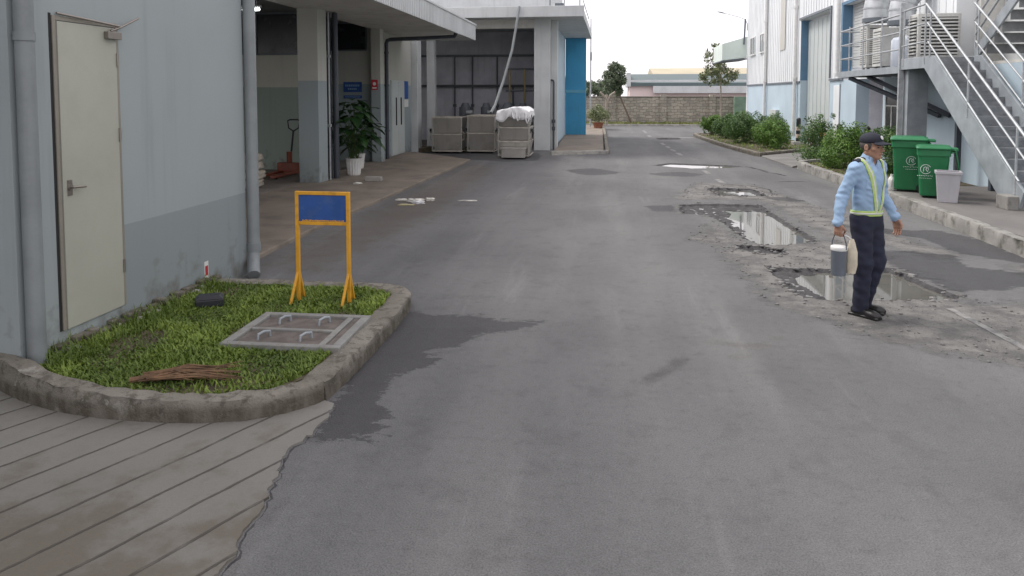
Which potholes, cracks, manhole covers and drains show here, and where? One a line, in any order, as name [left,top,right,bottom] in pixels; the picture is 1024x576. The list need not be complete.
pothole [678,204,817,245]
pothole [707,188,766,197]
pothole [767,267,959,301]
manhole cover [219,312,371,353]
pothole [738,245,789,254]
